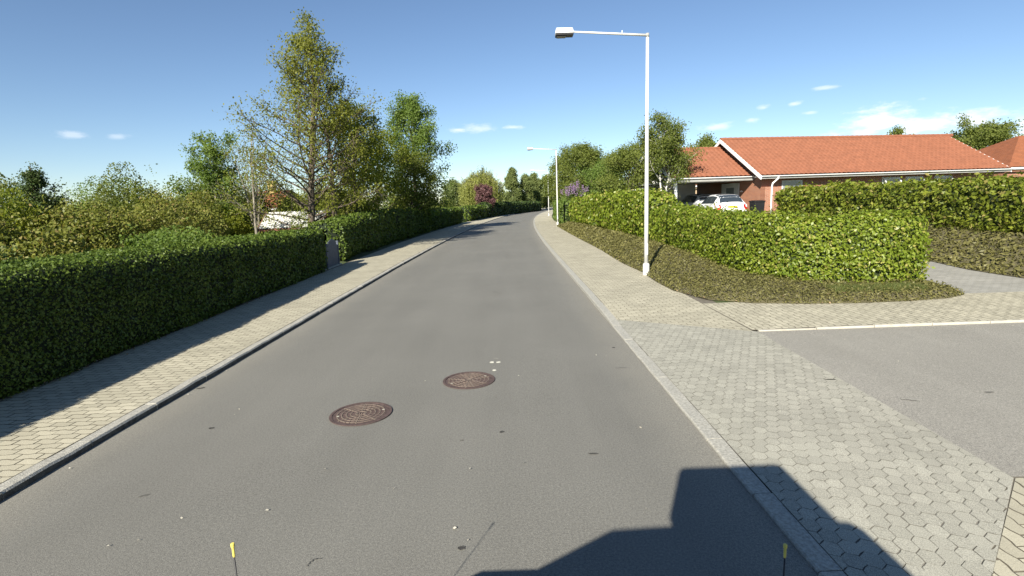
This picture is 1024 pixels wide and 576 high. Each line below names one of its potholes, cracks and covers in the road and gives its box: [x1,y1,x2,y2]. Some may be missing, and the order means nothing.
manhole cover [443,372,495,389]
manhole cover [329,402,392,426]
